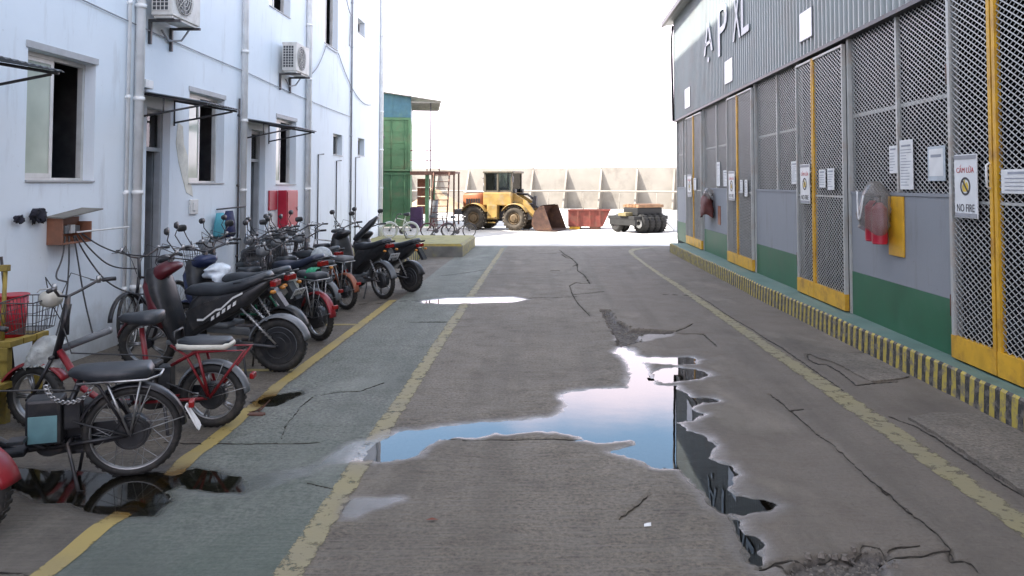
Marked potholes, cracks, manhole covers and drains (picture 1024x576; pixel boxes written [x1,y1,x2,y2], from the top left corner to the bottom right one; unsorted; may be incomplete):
pothole [599,309,669,347]
crack [759,394,1024,575]
crack [281,383,384,439]
pothole [787,545,899,576]
crack [531,251,597,316]
